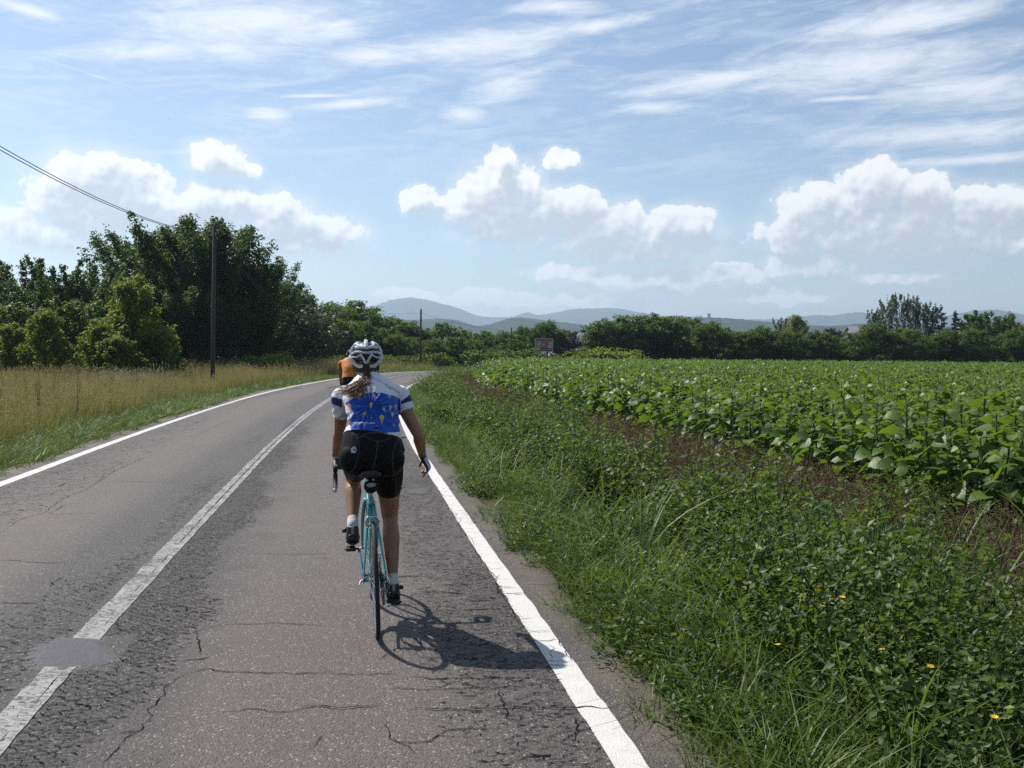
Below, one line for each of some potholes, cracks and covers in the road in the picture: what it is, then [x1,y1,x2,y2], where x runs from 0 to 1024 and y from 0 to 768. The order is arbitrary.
crack [0,423,620,768]
